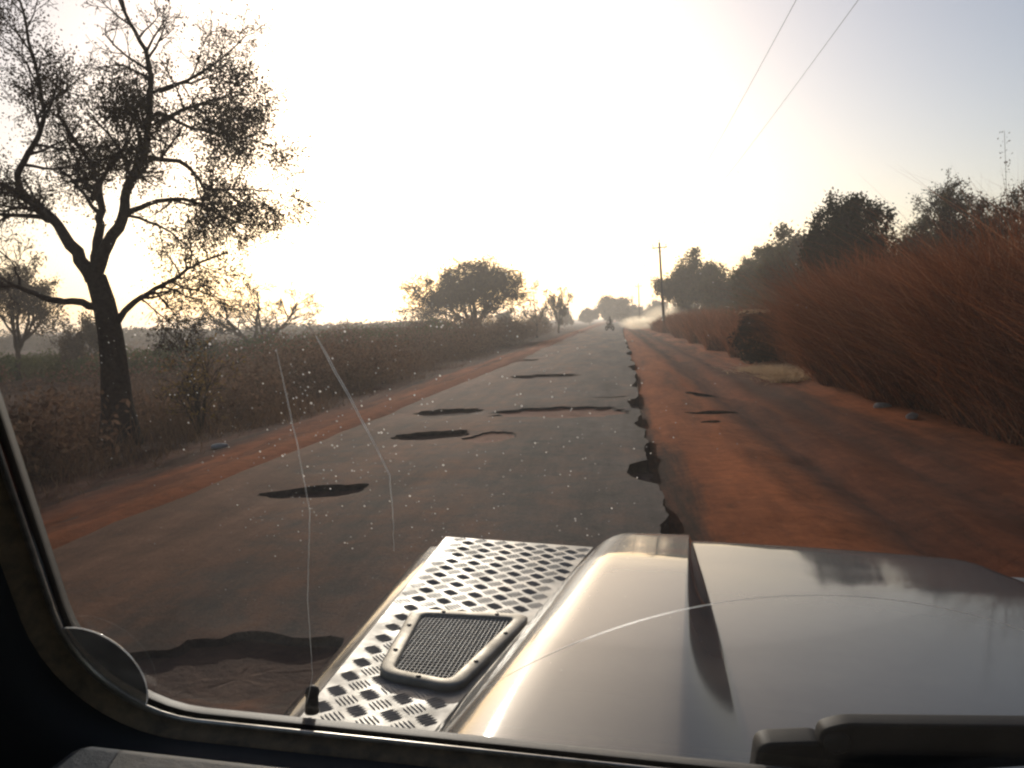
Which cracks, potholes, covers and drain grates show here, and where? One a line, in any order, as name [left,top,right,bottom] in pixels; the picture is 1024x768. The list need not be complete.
pothole [415,408,484,417]
pothole [461,431,516,443]
pothole [486,406,630,418]
pothole [129,631,344,704]
pothole [391,430,470,440]
pothole [256,483,369,499]
pothole [629,471,653,483]
